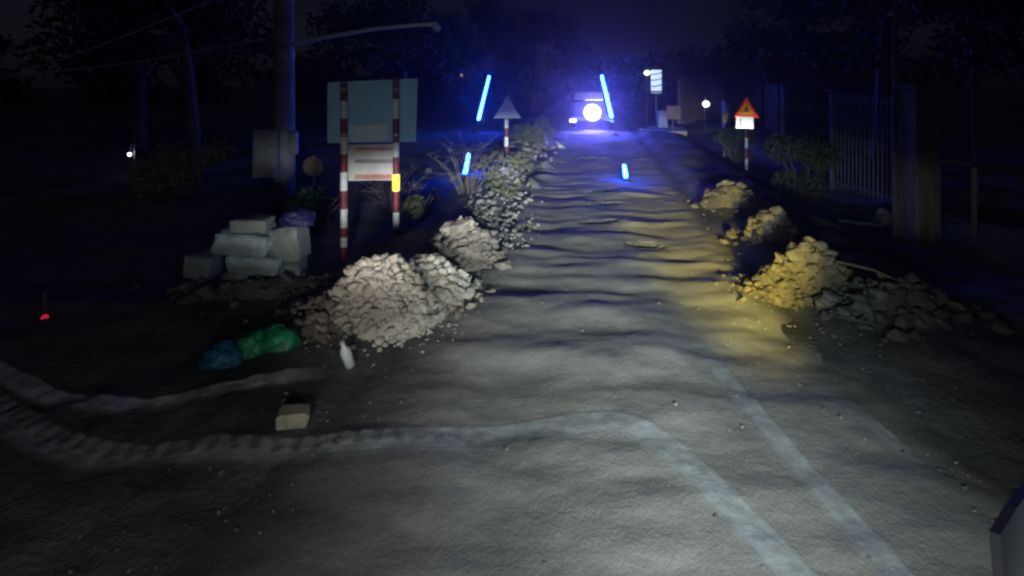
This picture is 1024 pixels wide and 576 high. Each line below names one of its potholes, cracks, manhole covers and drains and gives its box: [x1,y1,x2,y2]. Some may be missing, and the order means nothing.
pothole [624,242,666,250]
